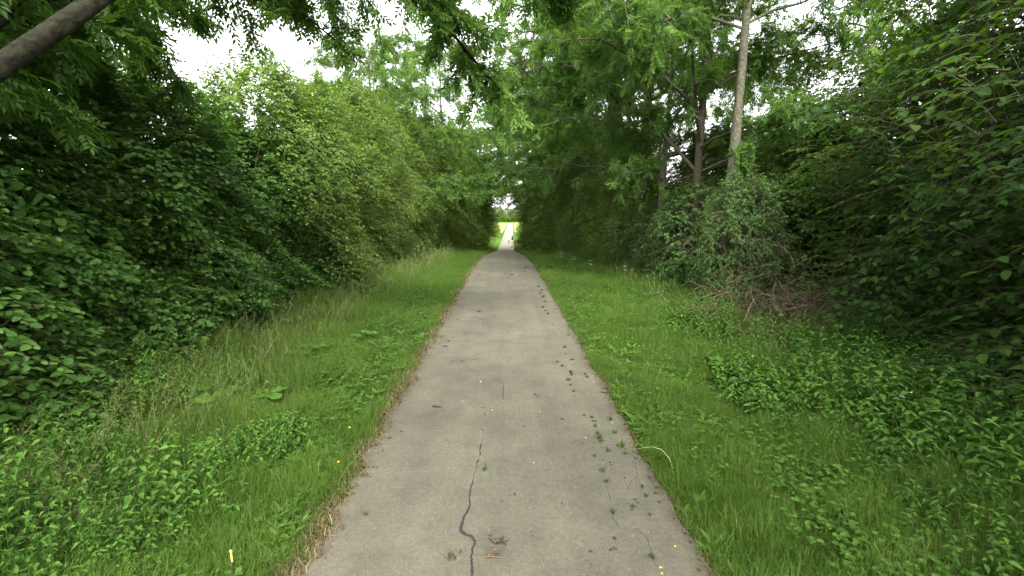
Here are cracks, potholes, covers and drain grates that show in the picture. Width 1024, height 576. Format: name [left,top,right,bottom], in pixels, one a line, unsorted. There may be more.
crack [459,407,485,576]
